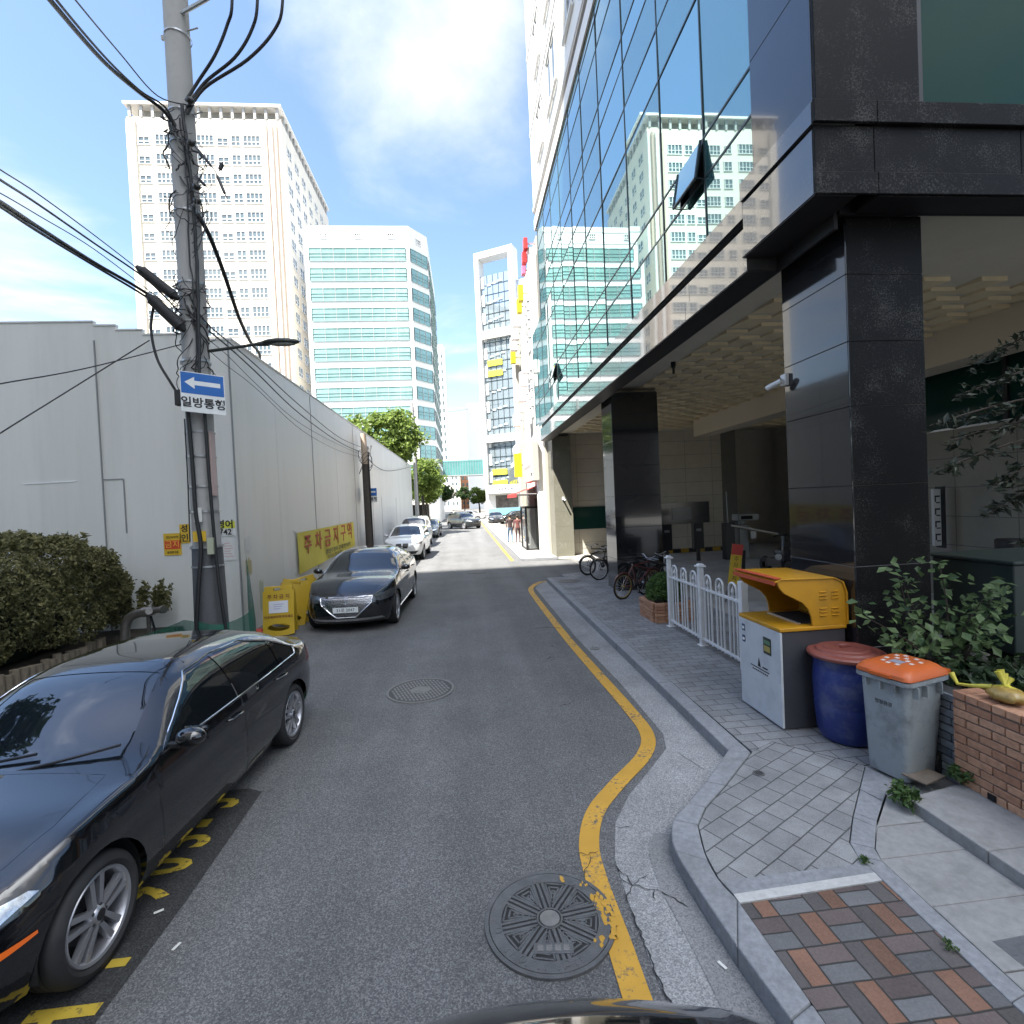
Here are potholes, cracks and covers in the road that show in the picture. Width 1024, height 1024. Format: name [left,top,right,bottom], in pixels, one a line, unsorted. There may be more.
manhole cover [484,871,618,982]
manhole cover [386,678,454,704]
crack [615,865,688,1003]
